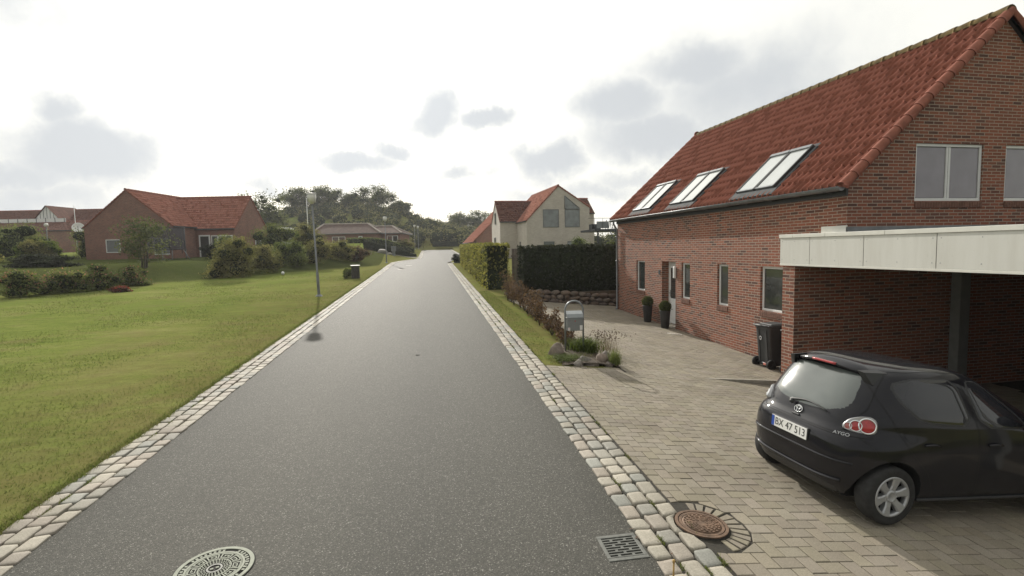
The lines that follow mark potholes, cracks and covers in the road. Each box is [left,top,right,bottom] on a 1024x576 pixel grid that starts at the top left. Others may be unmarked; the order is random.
drain grate [596,533,650,562]
manhole cover [172,546,256,576]
manhole cover [675,510,729,540]
